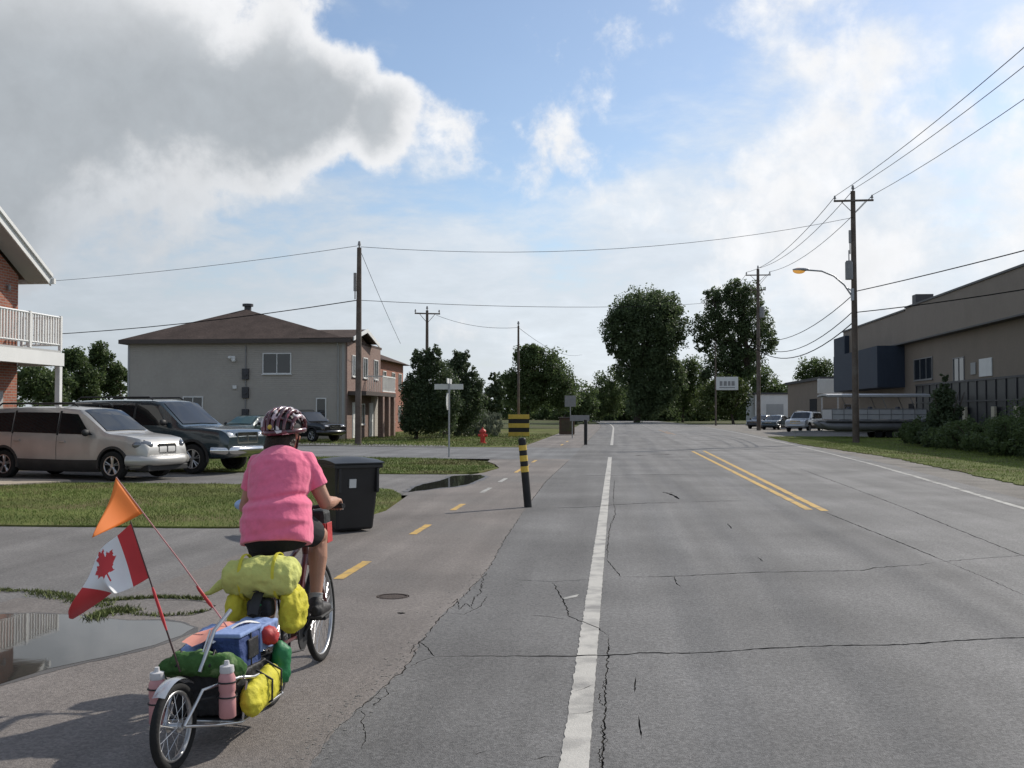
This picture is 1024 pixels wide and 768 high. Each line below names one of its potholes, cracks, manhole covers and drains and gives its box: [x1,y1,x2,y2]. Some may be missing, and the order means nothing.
crack [411,580,1024,768]
crack [564,474,1023,586]
